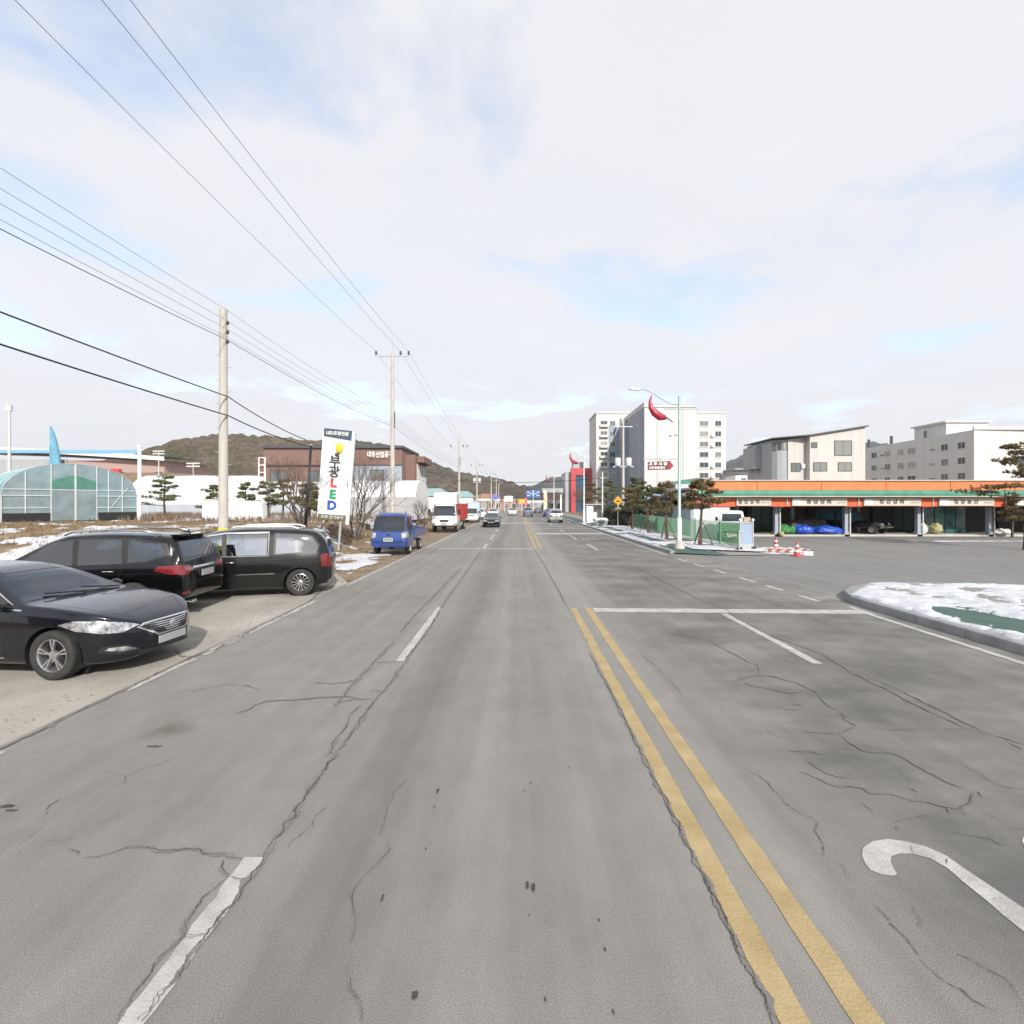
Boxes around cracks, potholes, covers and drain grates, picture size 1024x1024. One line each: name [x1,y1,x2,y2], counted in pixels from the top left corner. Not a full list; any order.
crack [535,550,1024,1024]
crack [0,551,481,1021]
